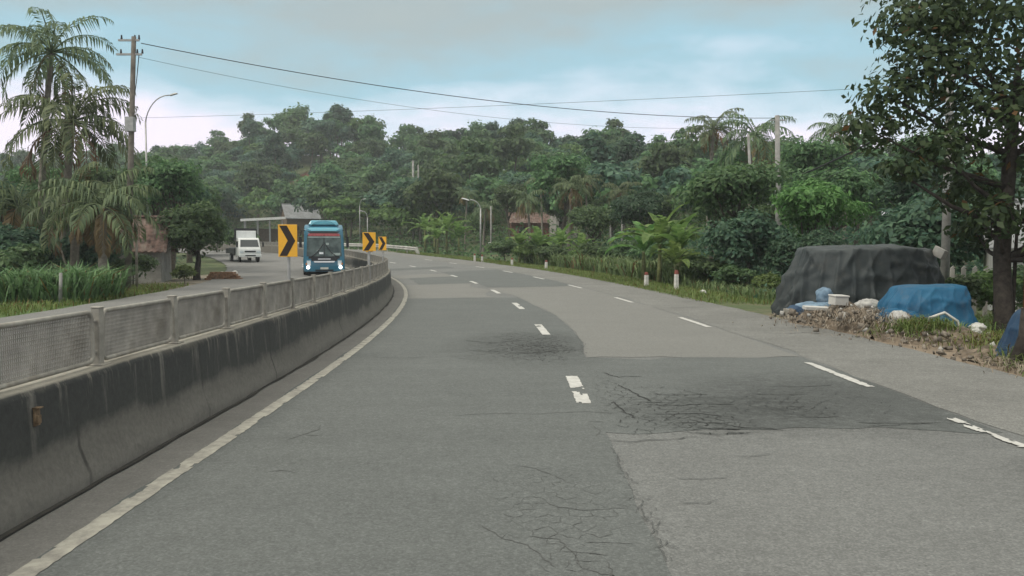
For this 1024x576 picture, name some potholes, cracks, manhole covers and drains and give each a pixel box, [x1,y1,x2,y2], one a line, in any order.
crack [458,373,938,561]
